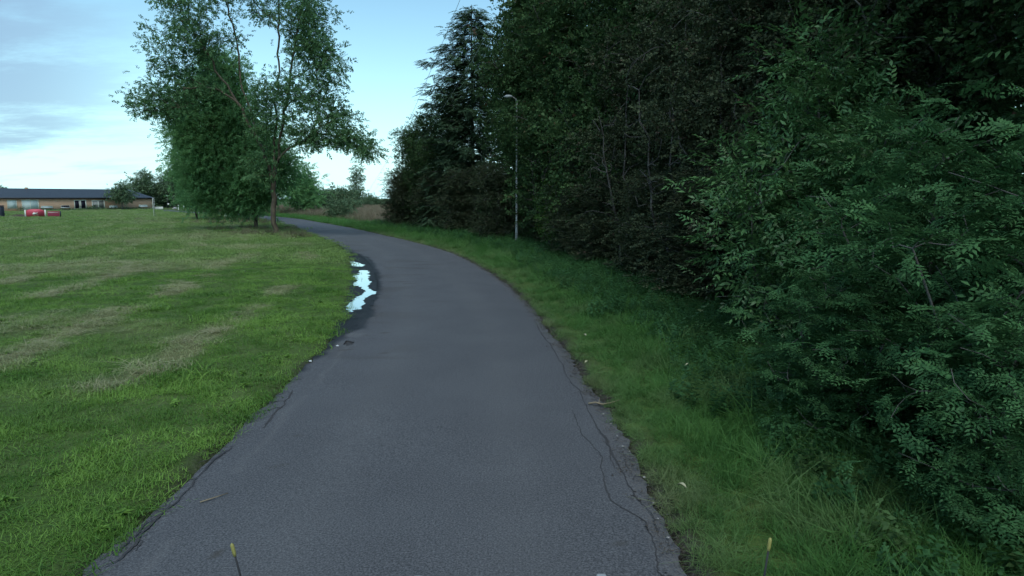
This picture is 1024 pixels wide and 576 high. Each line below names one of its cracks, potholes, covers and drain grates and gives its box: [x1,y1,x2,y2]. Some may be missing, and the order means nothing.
crack [263,390,293,428]
crack [535,322,662,575]
crack [102,447,232,567]
